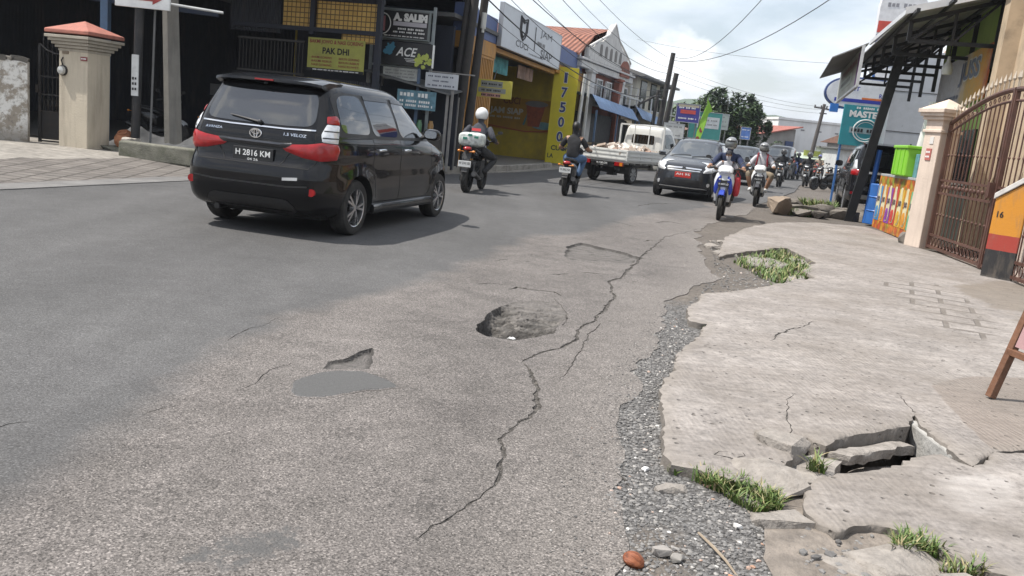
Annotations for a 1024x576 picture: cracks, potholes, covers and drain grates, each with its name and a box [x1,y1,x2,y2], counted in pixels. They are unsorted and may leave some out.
pothole [476,300,568,340]
pothole [323,348,374,369]
crack [418,203,700,539]
